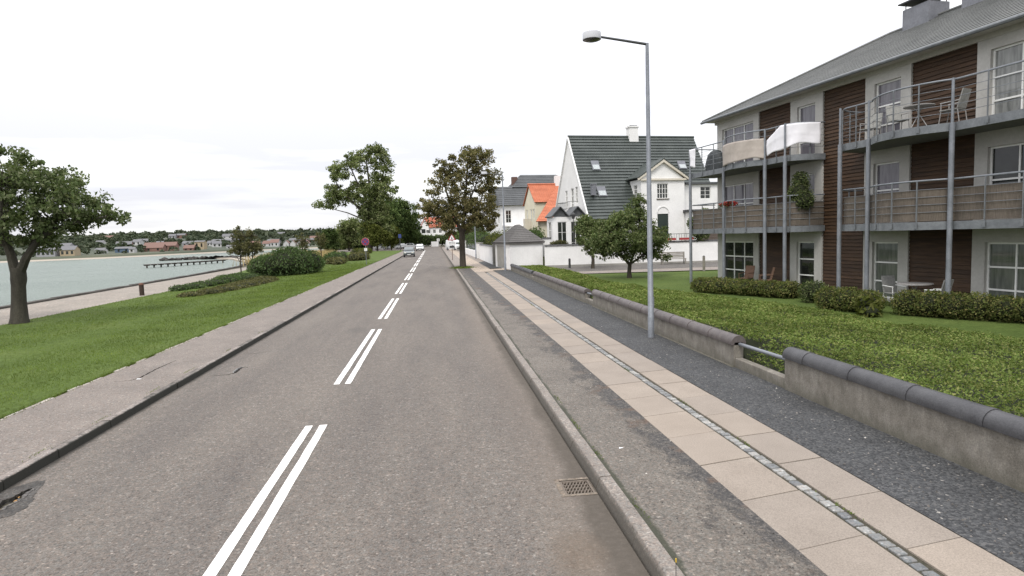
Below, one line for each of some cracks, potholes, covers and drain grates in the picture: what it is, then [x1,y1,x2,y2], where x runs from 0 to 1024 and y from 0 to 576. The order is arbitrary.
pothole [0,488,35,511]
drain grate [559,479,596,495]
